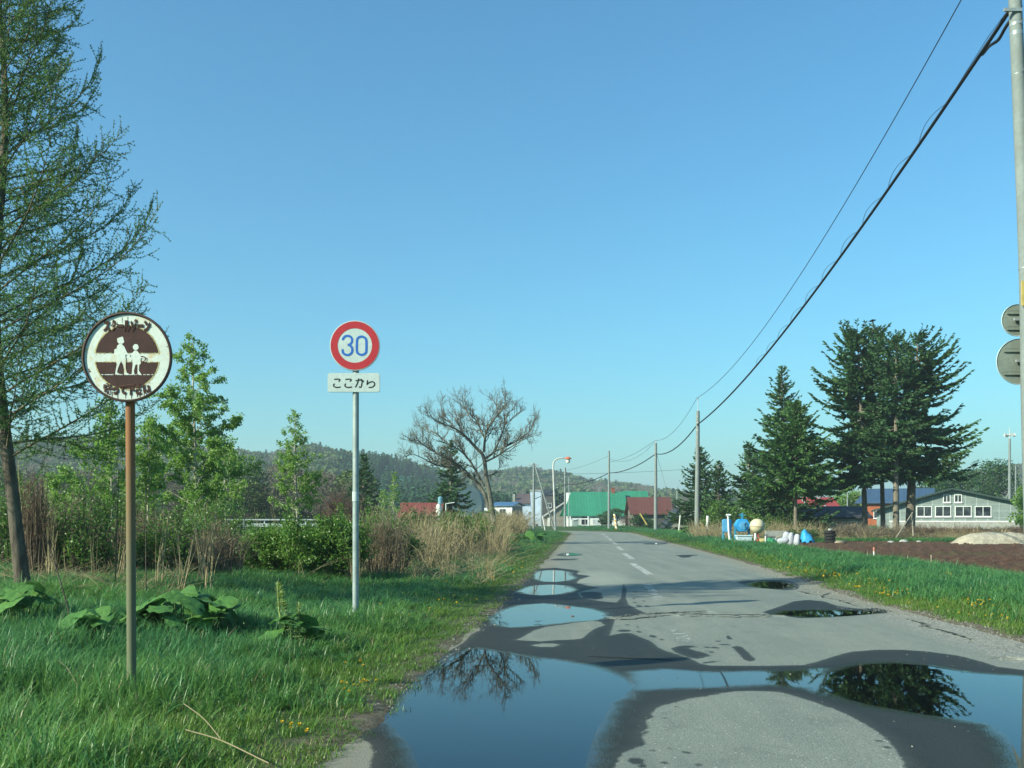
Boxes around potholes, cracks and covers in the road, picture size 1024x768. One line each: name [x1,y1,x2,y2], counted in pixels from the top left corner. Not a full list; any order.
crack [906,619,978,641]
crack [602,589,860,619]
